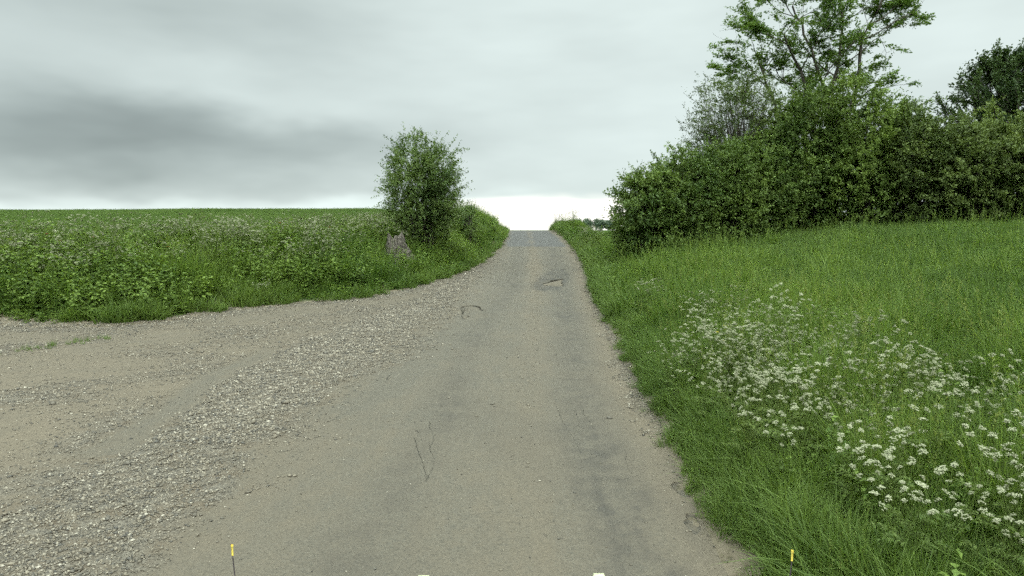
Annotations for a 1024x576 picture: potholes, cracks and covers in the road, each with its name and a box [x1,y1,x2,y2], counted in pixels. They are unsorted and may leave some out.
pothole [542,279,564,287]
pothole [671,481,690,497]
pothole [683,512,701,535]
pothole [460,305,484,320]
crack [415,422,434,481]
